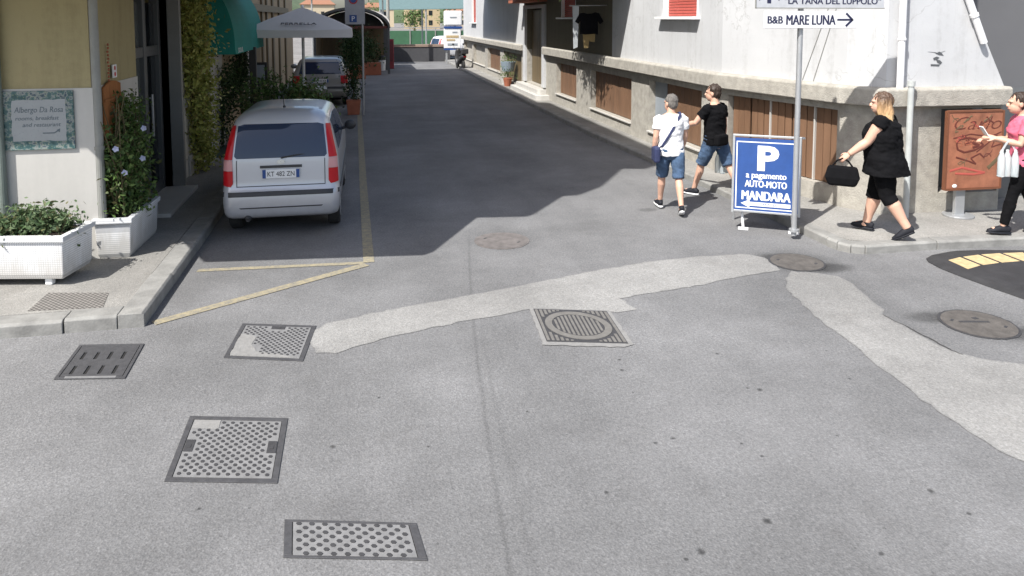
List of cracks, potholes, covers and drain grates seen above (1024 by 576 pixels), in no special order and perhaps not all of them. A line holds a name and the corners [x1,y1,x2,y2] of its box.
manhole cover [937,309,1022,340]
manhole cover [474,232,529,250]
manhole cover [534,309,628,344]
drain grate [54,343,144,380]
manhole cover [768,253,826,272]
